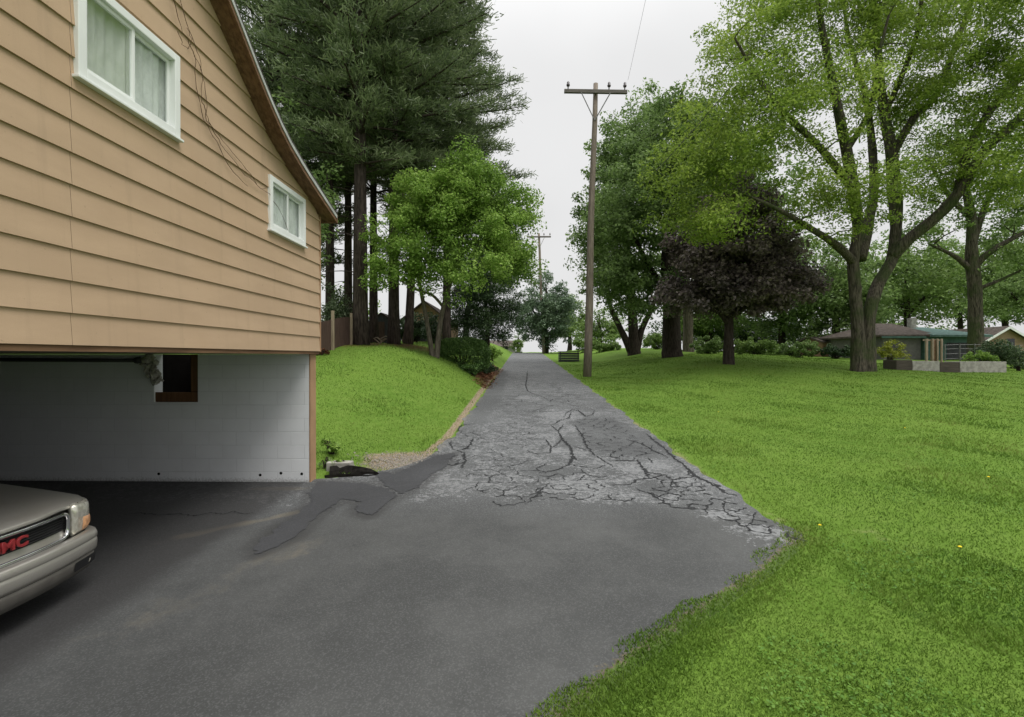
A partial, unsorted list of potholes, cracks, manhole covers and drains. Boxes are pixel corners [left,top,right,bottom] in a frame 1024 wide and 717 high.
crack [434,372,806,541]
